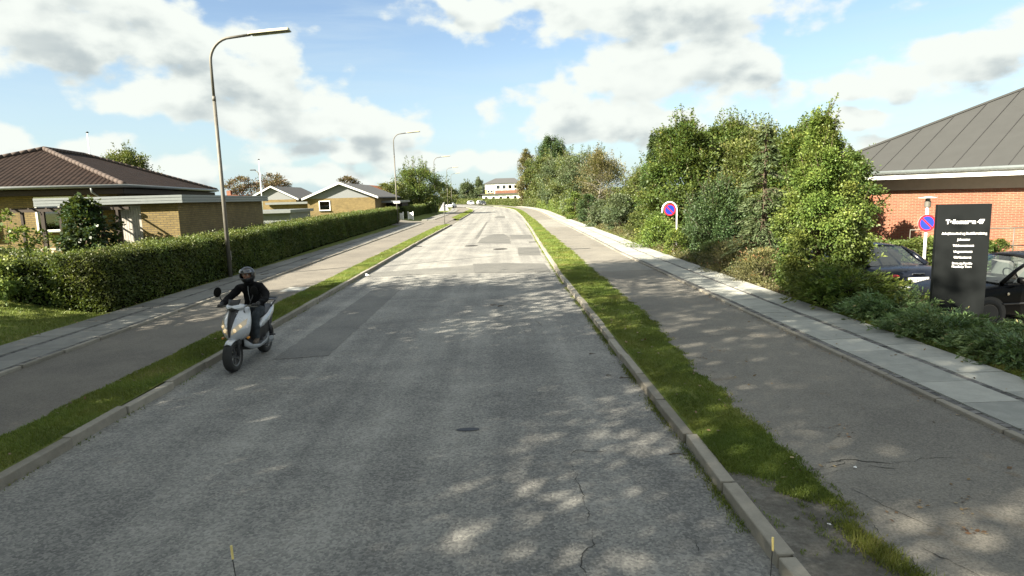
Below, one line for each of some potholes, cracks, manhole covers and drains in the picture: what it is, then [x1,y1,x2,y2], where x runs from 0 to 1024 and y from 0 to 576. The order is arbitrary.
crack [810,457,947,475]
crack [569,450,607,573]
crack [852,489,978,575]
